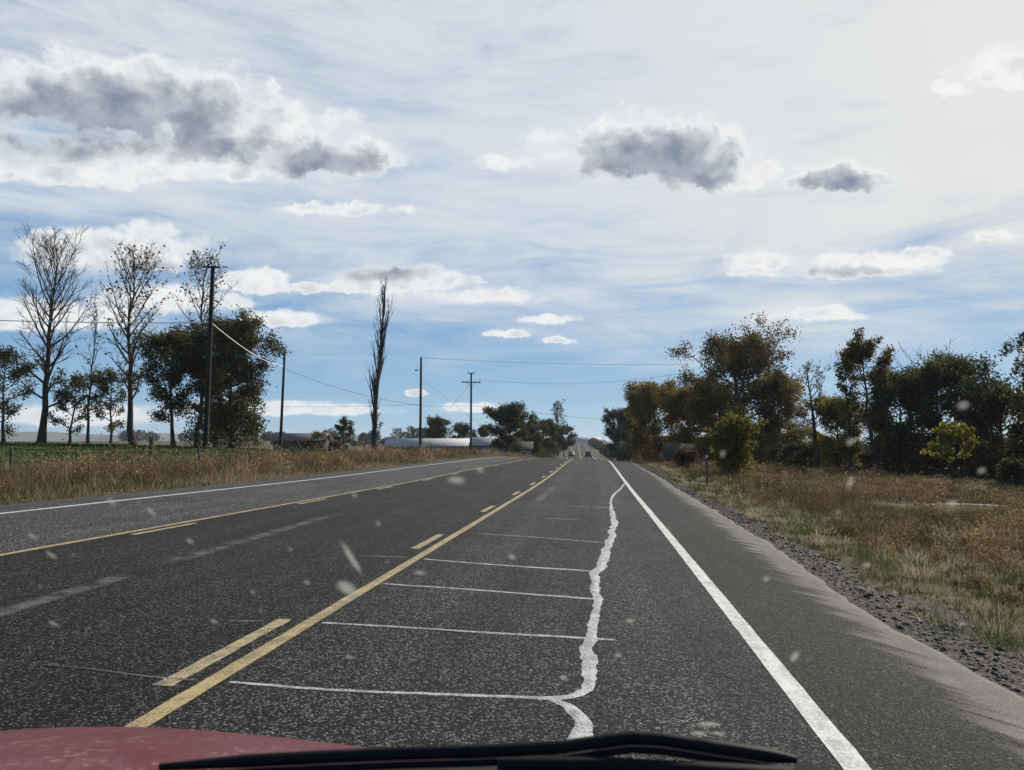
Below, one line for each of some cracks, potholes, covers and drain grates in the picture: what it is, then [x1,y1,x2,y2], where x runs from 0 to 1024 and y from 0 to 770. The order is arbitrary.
crack [228,483,626,755]
